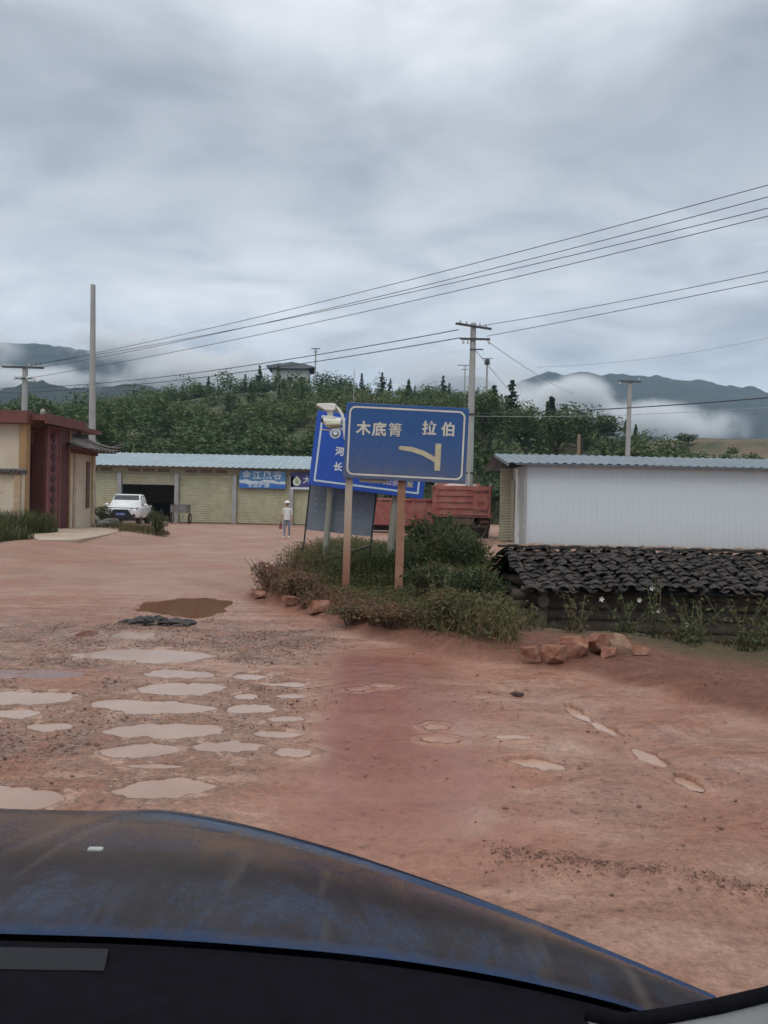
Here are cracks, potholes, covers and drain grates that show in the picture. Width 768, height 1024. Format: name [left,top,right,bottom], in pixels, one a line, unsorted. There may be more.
pothole [14,717,84,736]
pothole [659,769,718,799]
pothole [86,740,194,762]
pothole [126,680,236,698]
pothole [0,689,92,707]
pothole [215,702,285,717]
pothole [625,743,681,770]
pothole [585,721,632,742]
pothole [62,647,231,665]
pothole [133,668,223,680]
pothole [94,773,233,805]
pothole [80,696,228,718]
